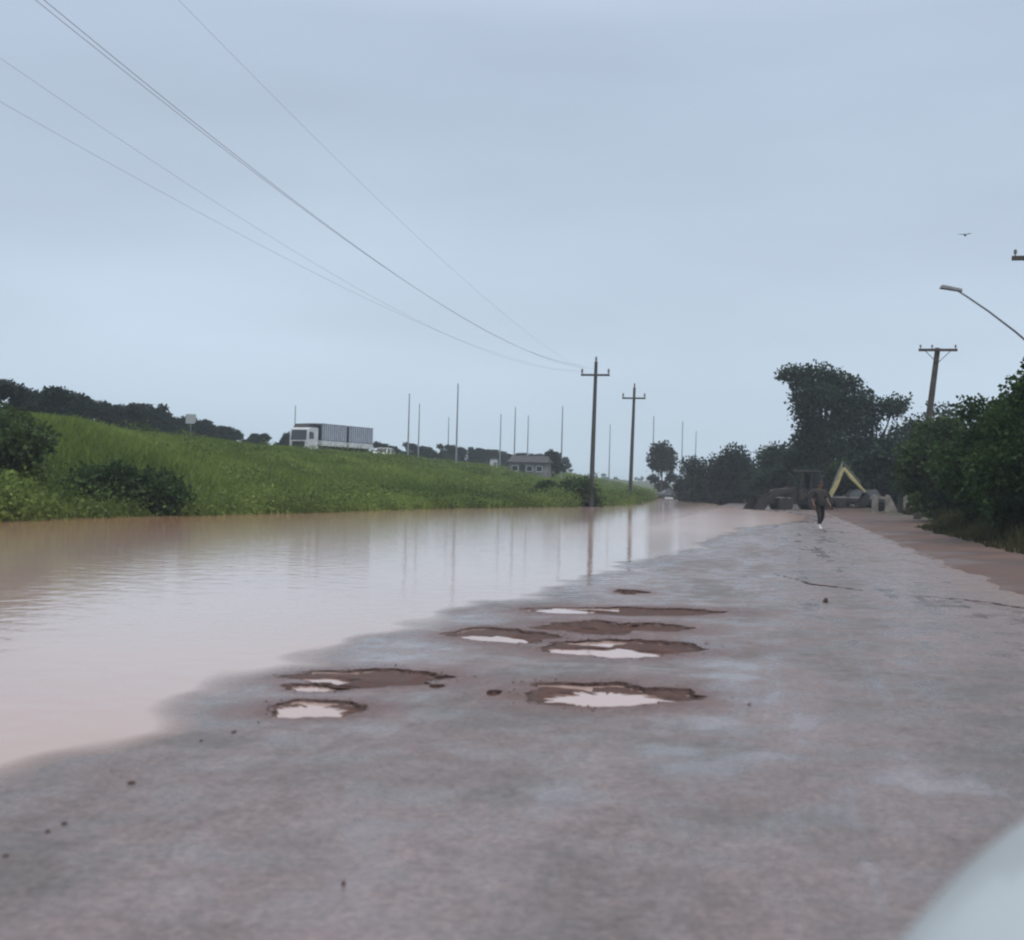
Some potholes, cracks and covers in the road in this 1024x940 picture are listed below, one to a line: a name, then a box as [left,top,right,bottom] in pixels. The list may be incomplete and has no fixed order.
pothole [438,626,562,644]
pothole [278,668,457,689]
pothole [527,619,696,635]
pothole [540,638,706,658]
pothole [523,606,729,616]
crack [930,596,1023,608]
pothole [280,682,359,692]
pothole [525,681,707,707]
crack [774,573,863,591]
pothole [267,699,368,718]
